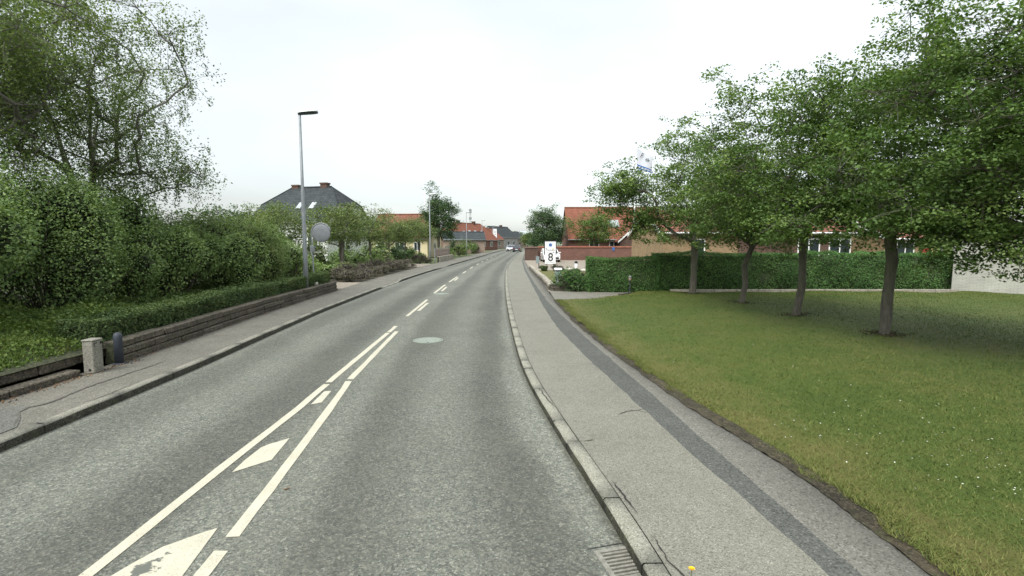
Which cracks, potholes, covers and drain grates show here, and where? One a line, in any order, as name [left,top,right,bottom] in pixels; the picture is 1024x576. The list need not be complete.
crack [611,480,638,513]
drain grate [588,543,642,576]
crack [650,534,685,576]
